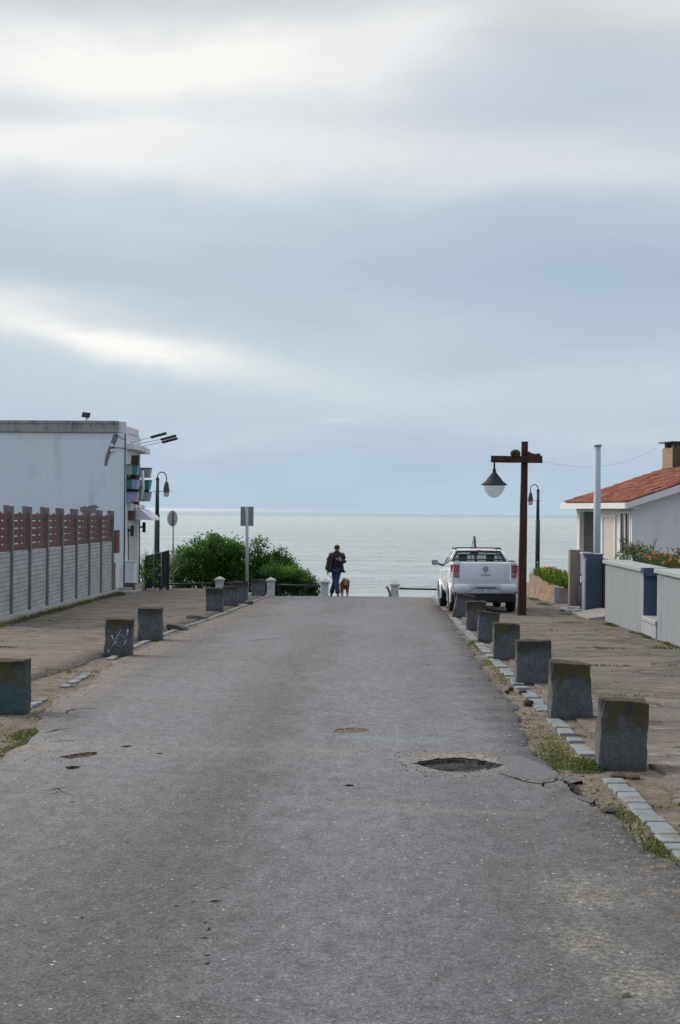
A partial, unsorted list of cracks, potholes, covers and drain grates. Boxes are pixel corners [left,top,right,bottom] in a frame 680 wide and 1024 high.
crack [499,773,596,807]
pothole [413,758,503,772]
